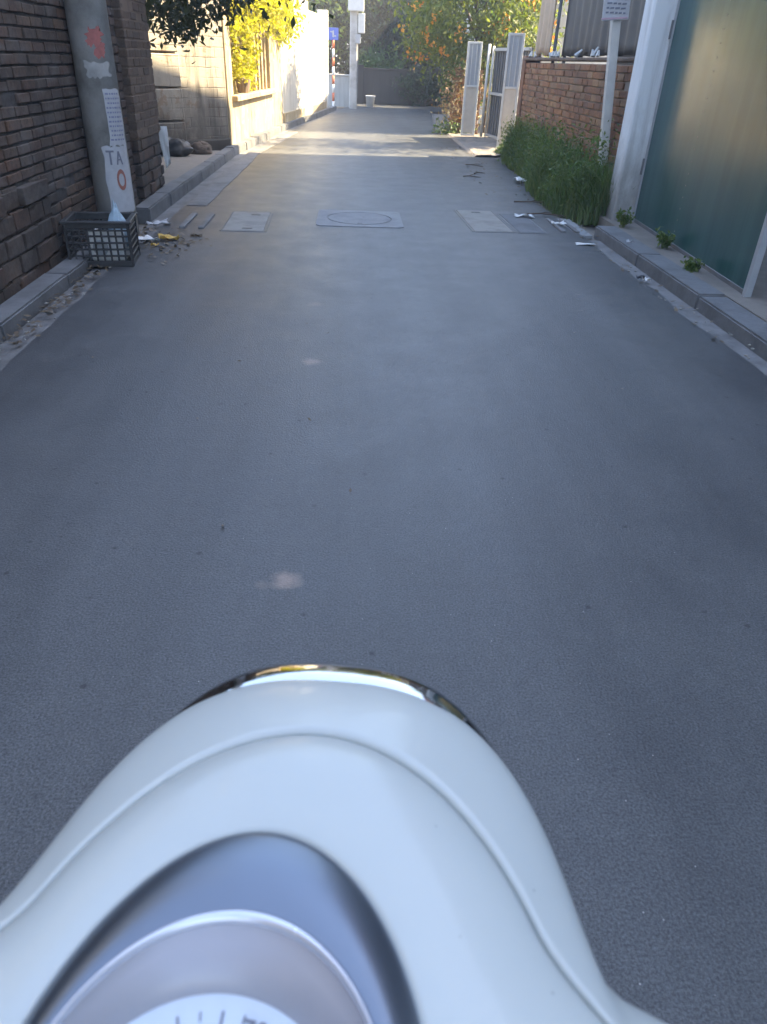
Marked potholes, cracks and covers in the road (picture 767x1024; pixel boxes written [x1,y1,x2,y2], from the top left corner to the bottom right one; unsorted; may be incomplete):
drain grate [179,213,215,229]
manhole cover [316,209,404,228]
manhole cover [454,210,516,233]
manhole cover [219,211,273,232]
manhole cover [497,214,549,234]
